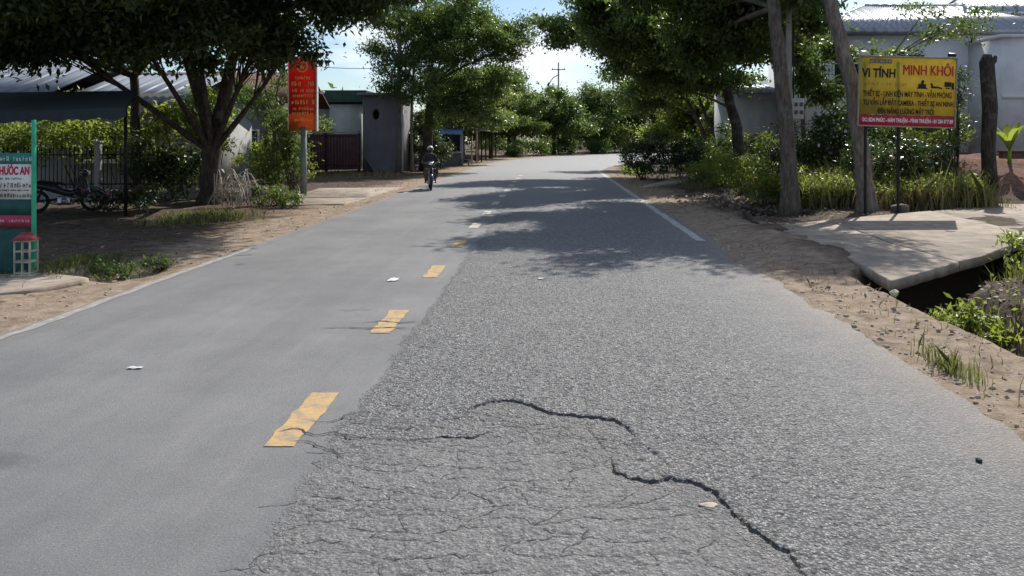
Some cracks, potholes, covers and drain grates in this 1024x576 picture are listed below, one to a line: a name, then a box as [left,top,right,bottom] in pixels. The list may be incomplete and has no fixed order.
crack [467,400,635,436]
crack [220,412,806,576]
